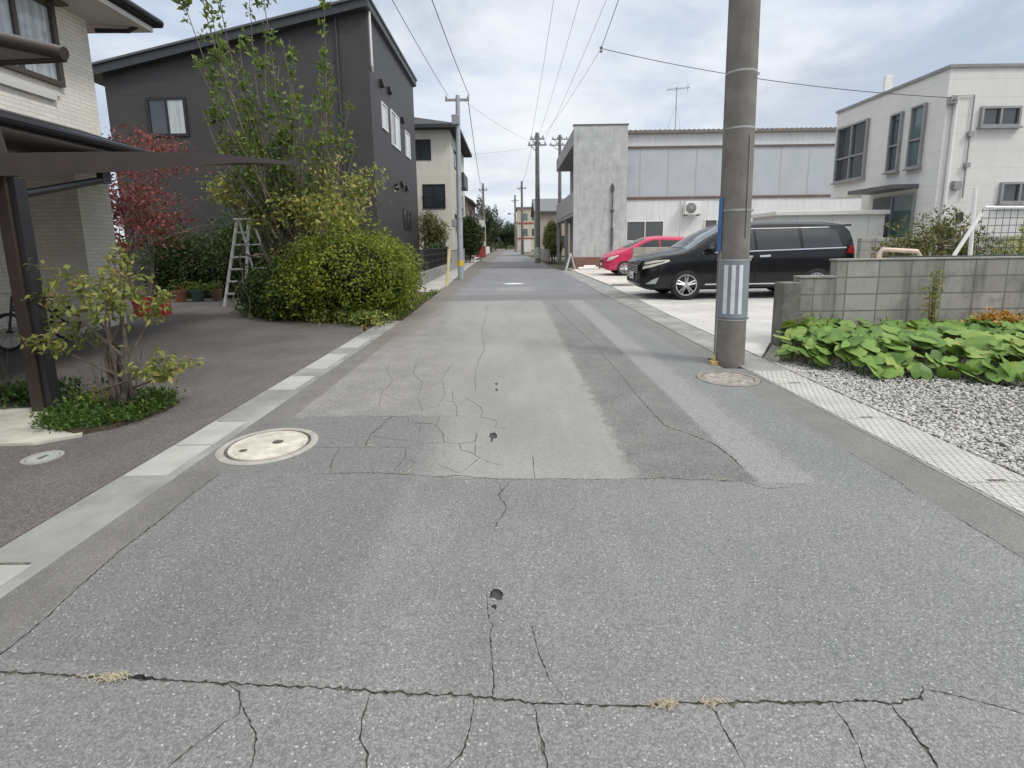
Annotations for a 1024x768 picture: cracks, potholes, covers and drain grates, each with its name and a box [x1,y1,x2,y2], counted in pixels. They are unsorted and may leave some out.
crack [0,474,1022,768]
crack [317,353,500,473]
manhole cover [20,450,65,465]
pothole [489,589,503,600]
manhole cover [696,371,761,387]
manhole cover [215,428,319,466]
